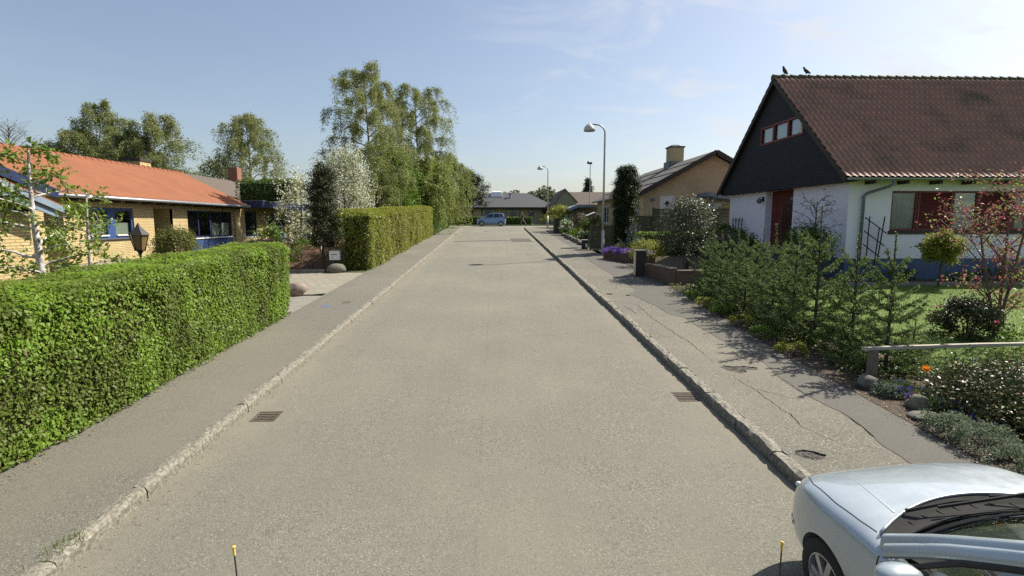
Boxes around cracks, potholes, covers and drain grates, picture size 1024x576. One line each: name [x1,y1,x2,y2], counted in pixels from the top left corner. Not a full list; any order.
drain grate [249,411,284,422]
pothole [795,449,826,461]
pothole [720,365,758,373]
drain grate [671,392,702,402]
crack [734,377,845,445]
